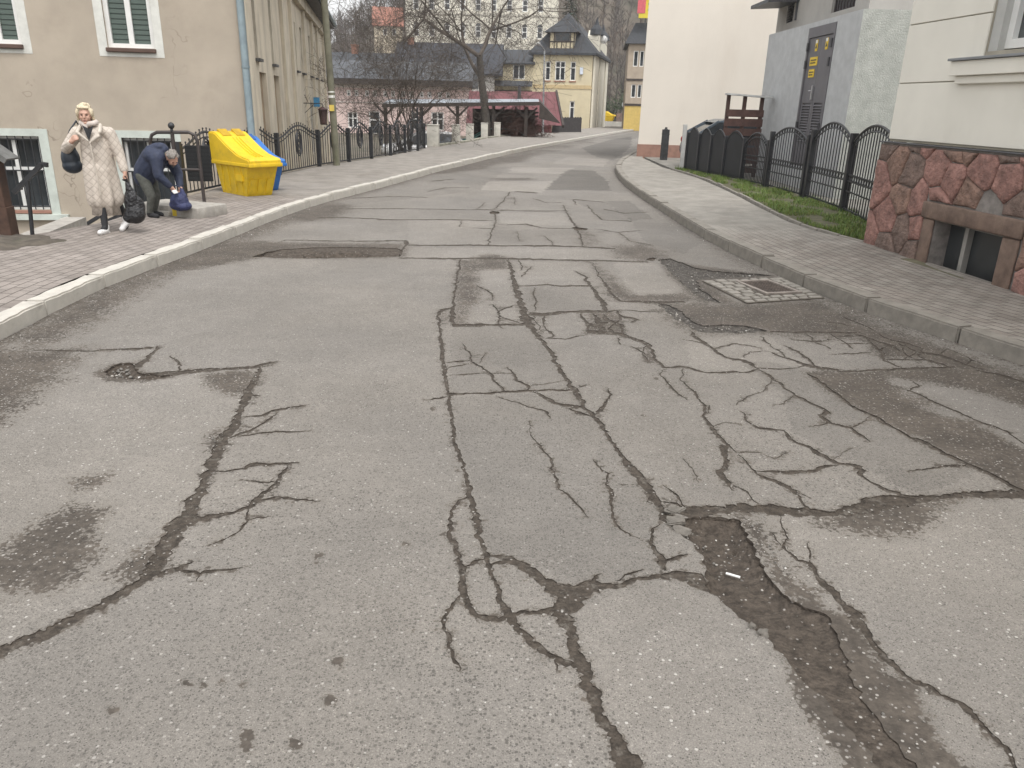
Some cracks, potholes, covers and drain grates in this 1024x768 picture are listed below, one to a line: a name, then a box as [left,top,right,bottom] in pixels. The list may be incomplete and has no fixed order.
crack [0,346,314,658]
pothole [104,363,173,380]
crack [317,192,1024,768]
pothole [683,516,918,768]
